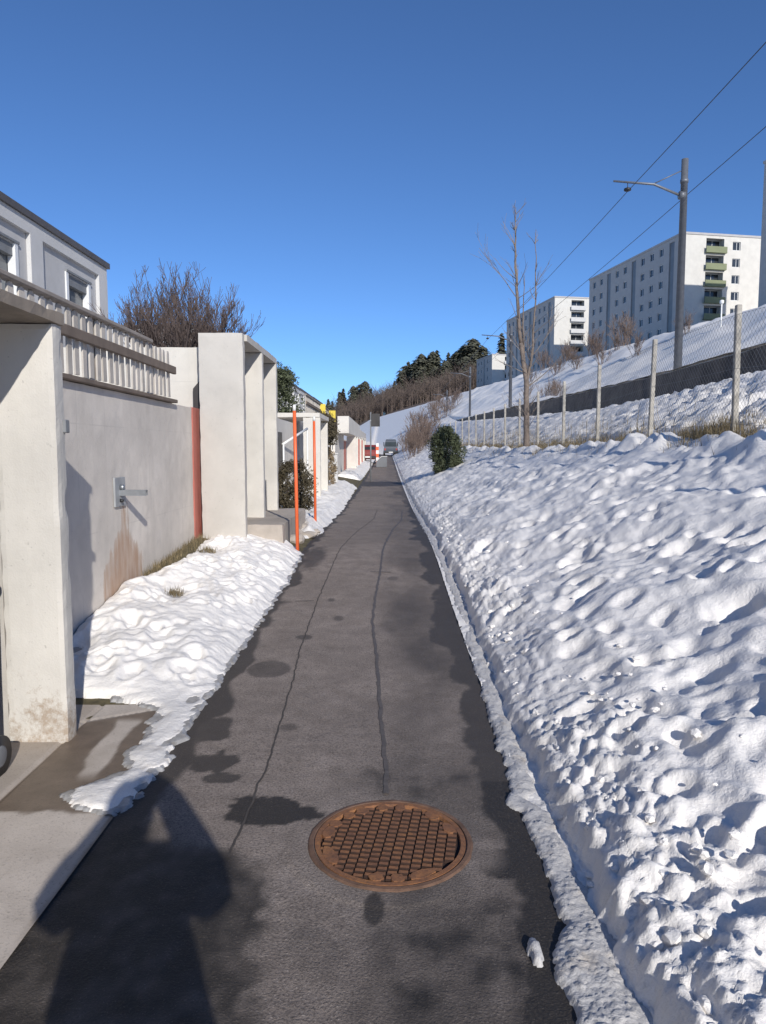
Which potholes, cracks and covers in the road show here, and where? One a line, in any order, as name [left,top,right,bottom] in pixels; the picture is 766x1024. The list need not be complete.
manhole cover [308,800,473,892]
